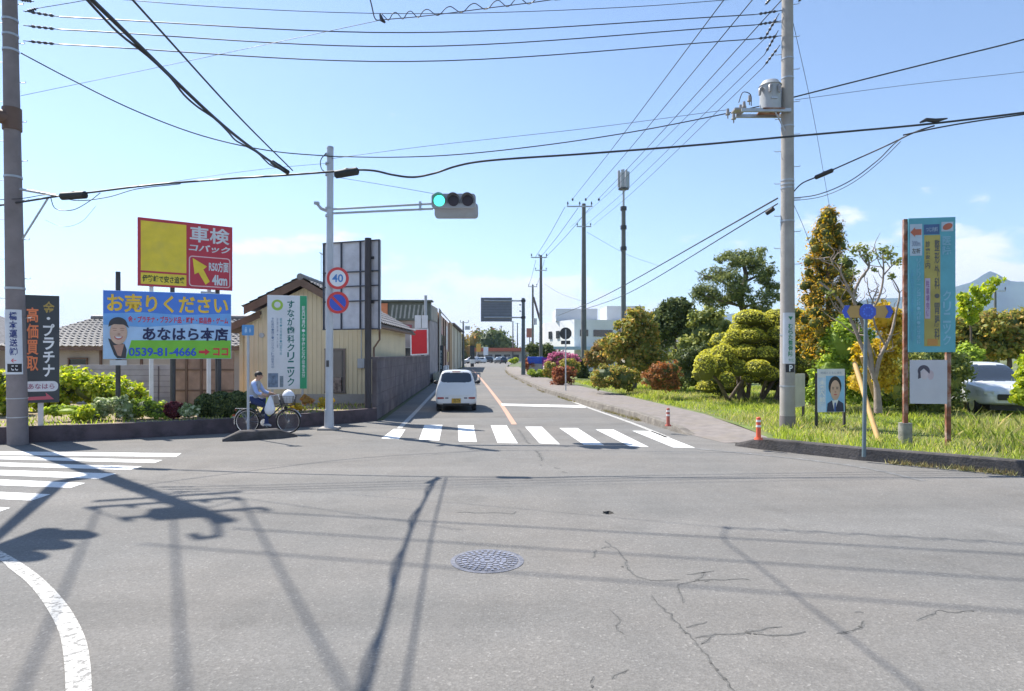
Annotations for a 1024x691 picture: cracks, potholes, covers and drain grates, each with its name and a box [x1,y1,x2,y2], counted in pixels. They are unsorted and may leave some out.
crack [610,610,624,634]
crack [836,611,865,634]
crack [621,560,806,691]
crack [518,429,567,473]
crack [916,610,974,621]
manhole cover [450,549,524,573]
crack [590,669,629,687]
